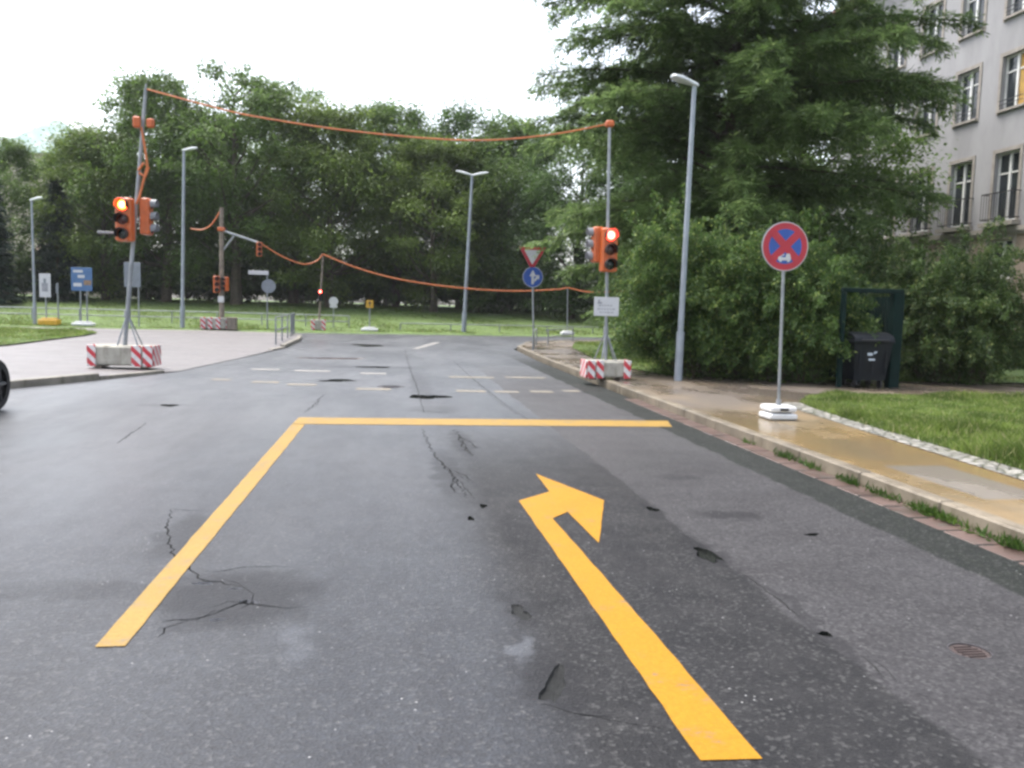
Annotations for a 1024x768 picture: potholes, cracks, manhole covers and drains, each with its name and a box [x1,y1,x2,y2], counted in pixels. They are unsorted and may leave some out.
crack [405,352,476,498]
manhole cover [947,643,993,659]
pothole [511,604,532,621]
pothole [538,663,566,703]
crack [156,509,305,637]
pothole [693,547,723,563]
